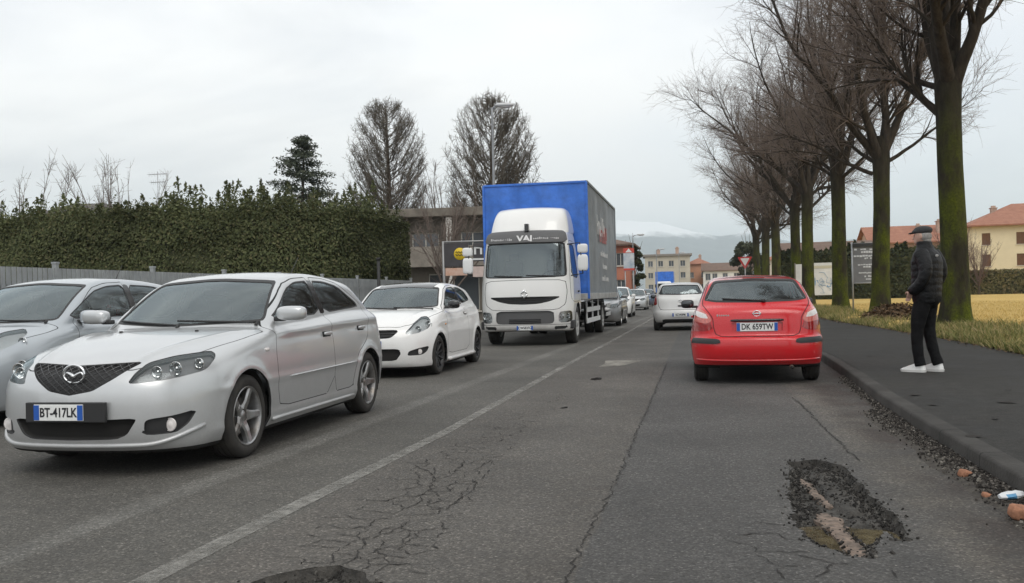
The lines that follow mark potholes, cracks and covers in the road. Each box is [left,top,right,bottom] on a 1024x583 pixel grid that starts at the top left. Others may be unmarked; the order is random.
crack [286,427,521,573]
pothole [237,562,380,583]
crack [792,397,860,460]
crack [723,521,897,579]
pothole [777,457,920,559]
